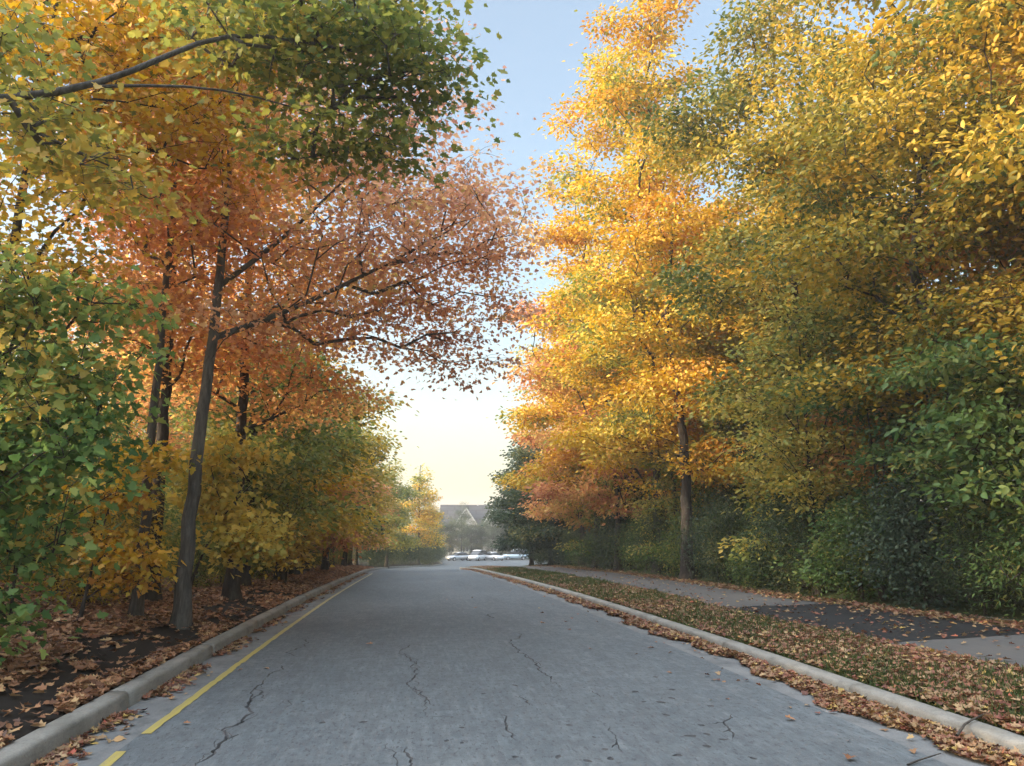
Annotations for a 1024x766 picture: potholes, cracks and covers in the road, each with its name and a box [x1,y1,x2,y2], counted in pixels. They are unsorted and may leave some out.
crack [189,637,309,766]
crack [398,645,451,717]
crack [504,696,530,740]
crack [385,745,413,766]
crack [510,632,560,688]
crack [714,714,735,739]
